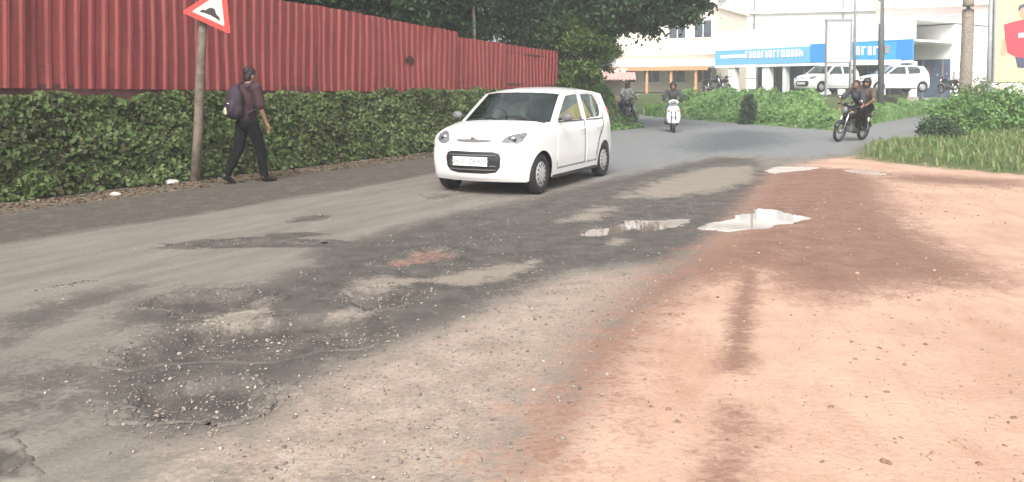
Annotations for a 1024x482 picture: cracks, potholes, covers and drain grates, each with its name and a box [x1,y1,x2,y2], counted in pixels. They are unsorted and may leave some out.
pothole [92,311,391,372]
pothole [154,237,349,250]
pothole [312,282,419,314]
pothole [755,165,832,175]
pothole [830,168,902,177]
pothole [107,372,307,427]
pothole [688,205,821,234]
pothole [133,288,292,321]
pothole [0,431,45,482]
pothole [566,217,694,238]
